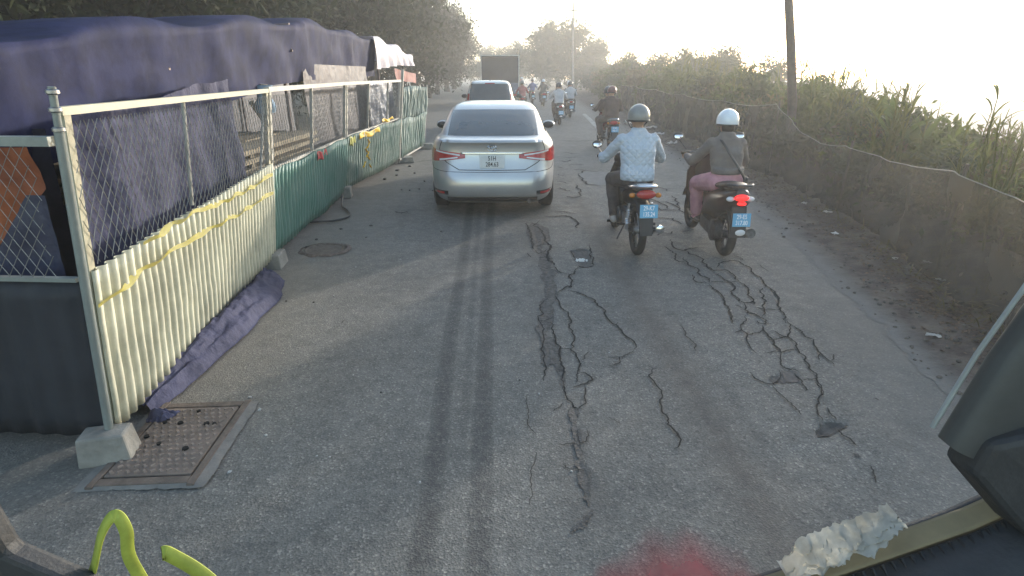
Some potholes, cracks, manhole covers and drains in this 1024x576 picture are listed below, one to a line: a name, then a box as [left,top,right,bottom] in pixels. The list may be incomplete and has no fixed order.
crack [525,152,682,449]
crack [651,187,856,445]
pothole [815,422,848,437]
pothole [572,248,593,268]
manhole cover [73,400,259,492]
manhole cover [298,242,352,258]
